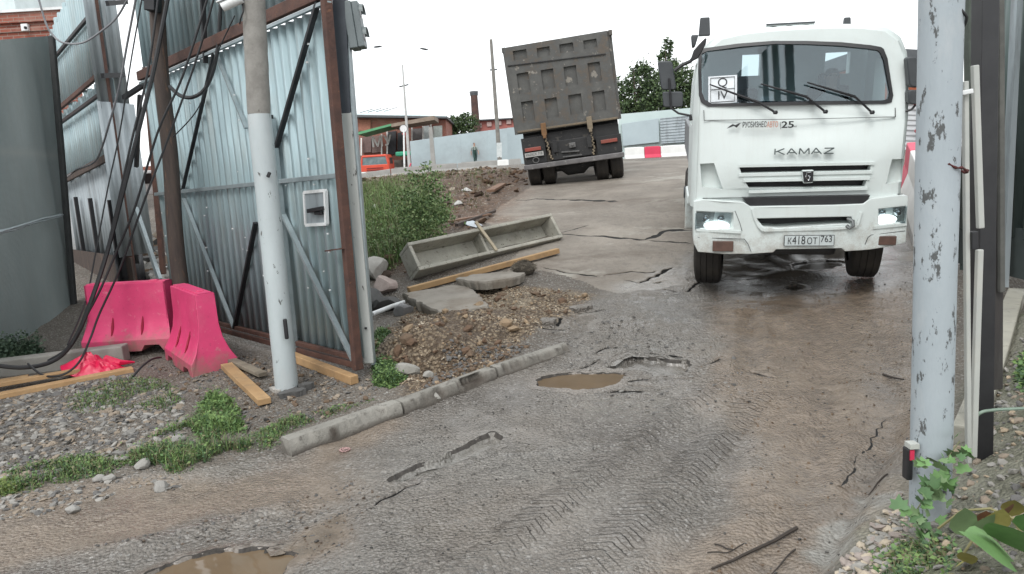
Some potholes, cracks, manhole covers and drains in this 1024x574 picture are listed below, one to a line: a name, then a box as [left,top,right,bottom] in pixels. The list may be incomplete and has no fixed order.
pothole [599,352,701,380]
crack [560,225,589,233]
crack [540,266,708,294]
pothole [132,537,314,574]
crack [363,475,434,509]
pothole [374,427,514,488]
pothole [527,369,635,394]
